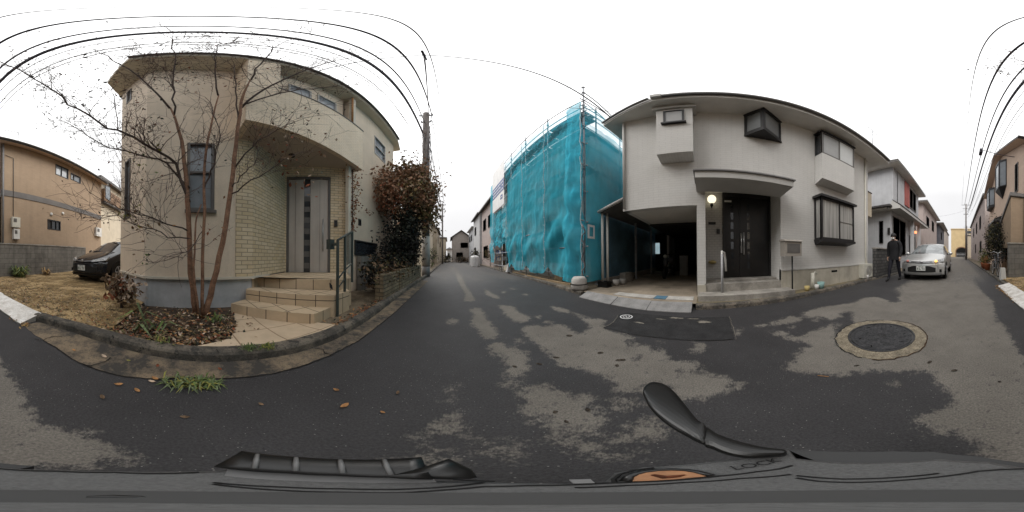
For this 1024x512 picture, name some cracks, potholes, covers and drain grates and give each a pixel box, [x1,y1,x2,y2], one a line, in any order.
manhole cover [835,320,926,360]
